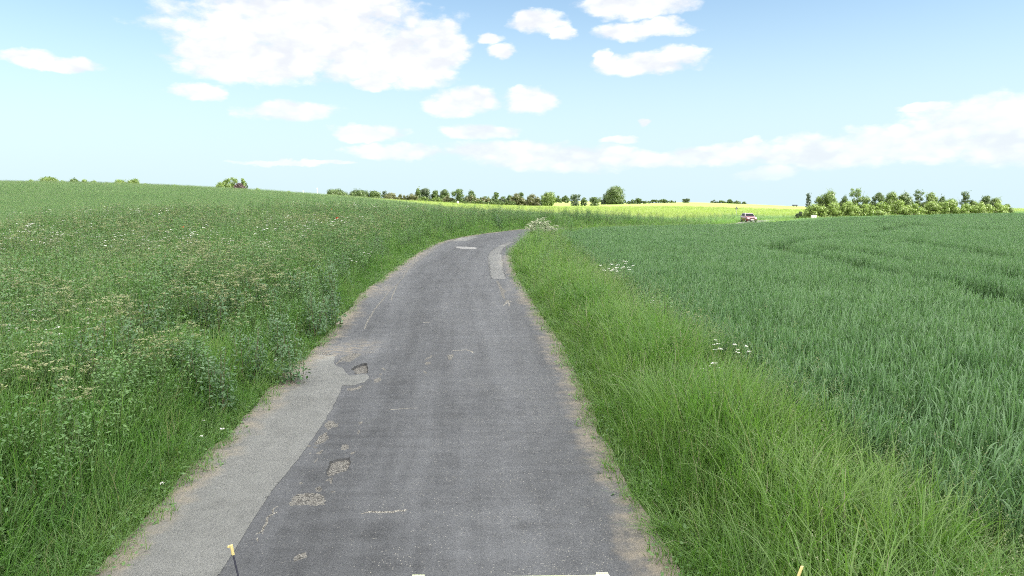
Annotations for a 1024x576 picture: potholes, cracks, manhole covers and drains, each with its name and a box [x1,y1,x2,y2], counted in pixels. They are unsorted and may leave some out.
pothole [351,363,368,374]
crack [364,250,431,329]
pothole [326,457,351,476]
crack [256,506,278,541]
